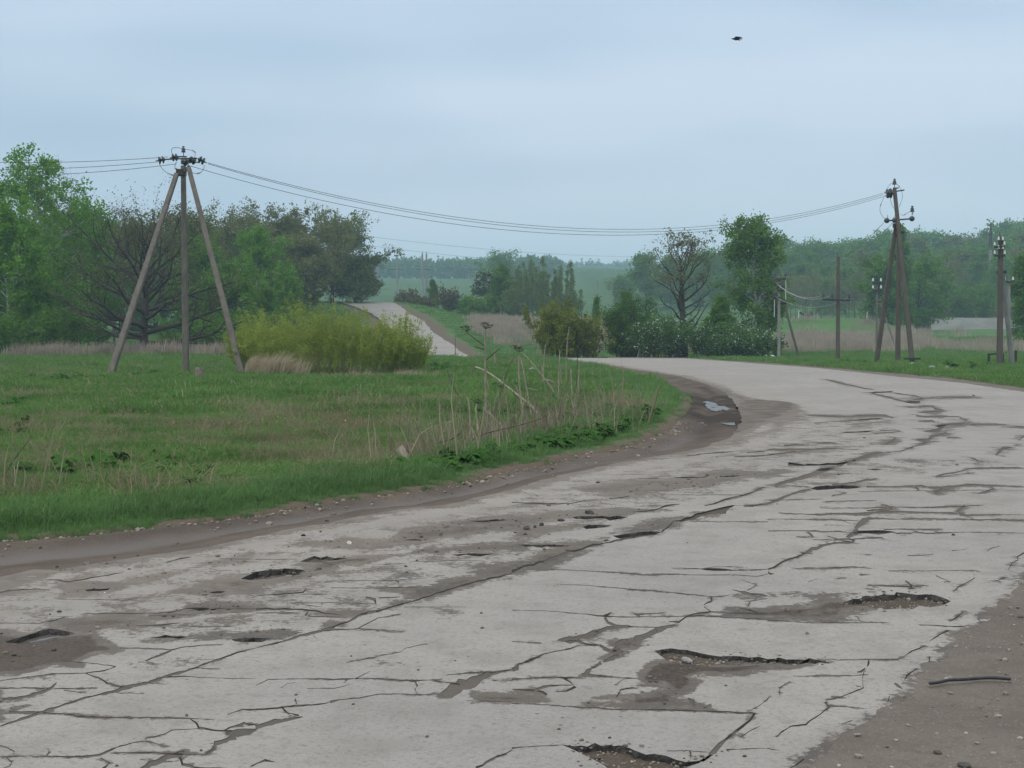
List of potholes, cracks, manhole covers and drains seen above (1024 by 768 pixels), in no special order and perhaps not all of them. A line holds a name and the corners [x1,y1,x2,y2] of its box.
pothole [6,629,74,644]
crack [0,379,1024,768]
pothole [647,644,850,672]
pothole [837,590,950,612]
pothole [564,738,729,768]
pothole [238,564,312,585]
